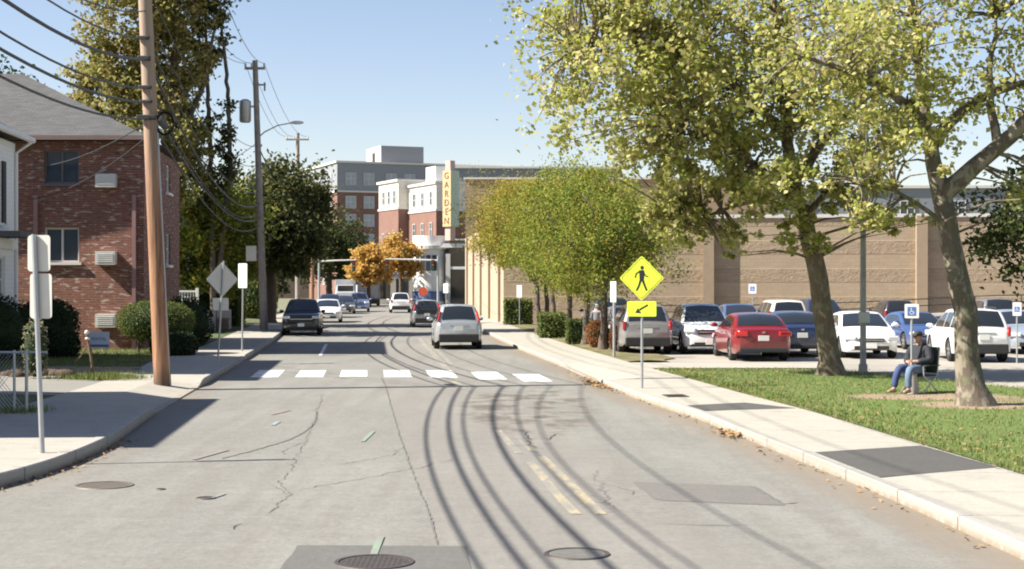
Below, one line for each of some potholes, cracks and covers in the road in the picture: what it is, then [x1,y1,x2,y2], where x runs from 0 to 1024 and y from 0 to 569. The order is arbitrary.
manhole cover [544,547,610,560]
manhole cover [74,481,134,490]
manhole cover [334,554,415,569]
crack [222,395,323,512]
crack [575,470,634,510]
